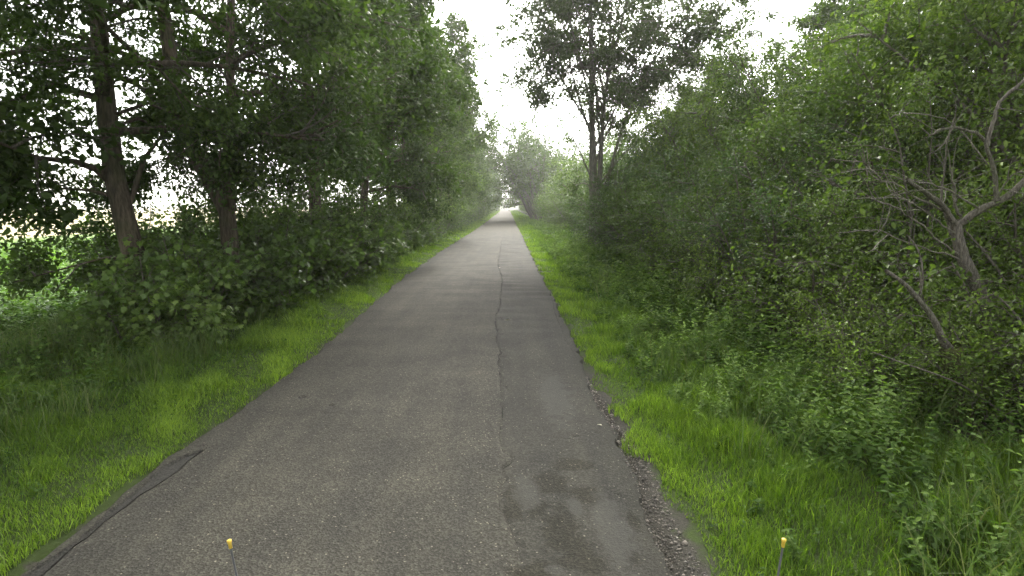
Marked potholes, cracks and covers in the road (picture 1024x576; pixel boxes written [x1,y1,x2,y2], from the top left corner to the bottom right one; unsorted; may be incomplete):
crack [23,447,211,576]
